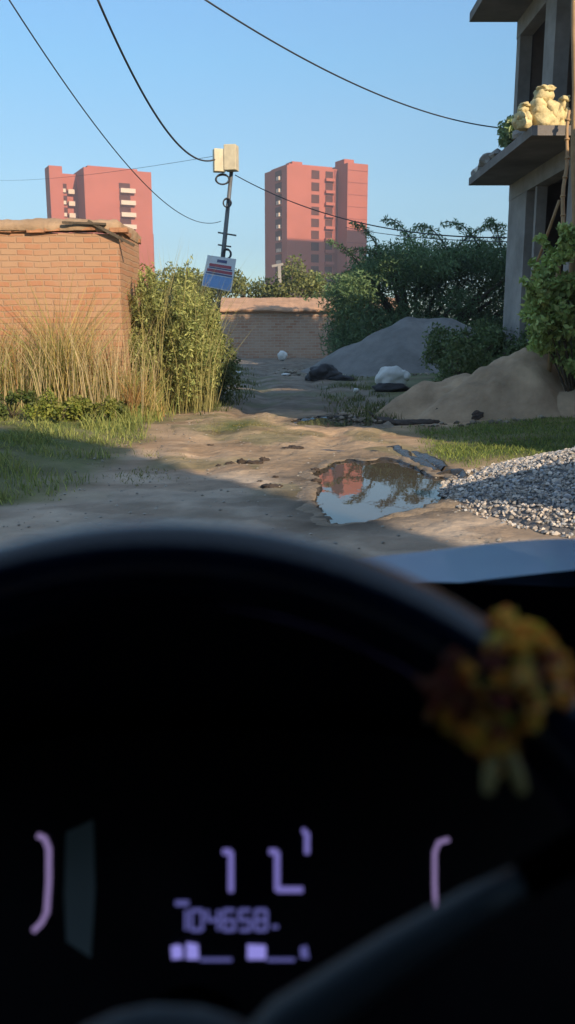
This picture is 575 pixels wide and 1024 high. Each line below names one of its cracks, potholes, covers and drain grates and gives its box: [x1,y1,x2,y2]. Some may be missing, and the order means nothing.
pothole [295,456,459,526]
pothole [289,415,399,428]
